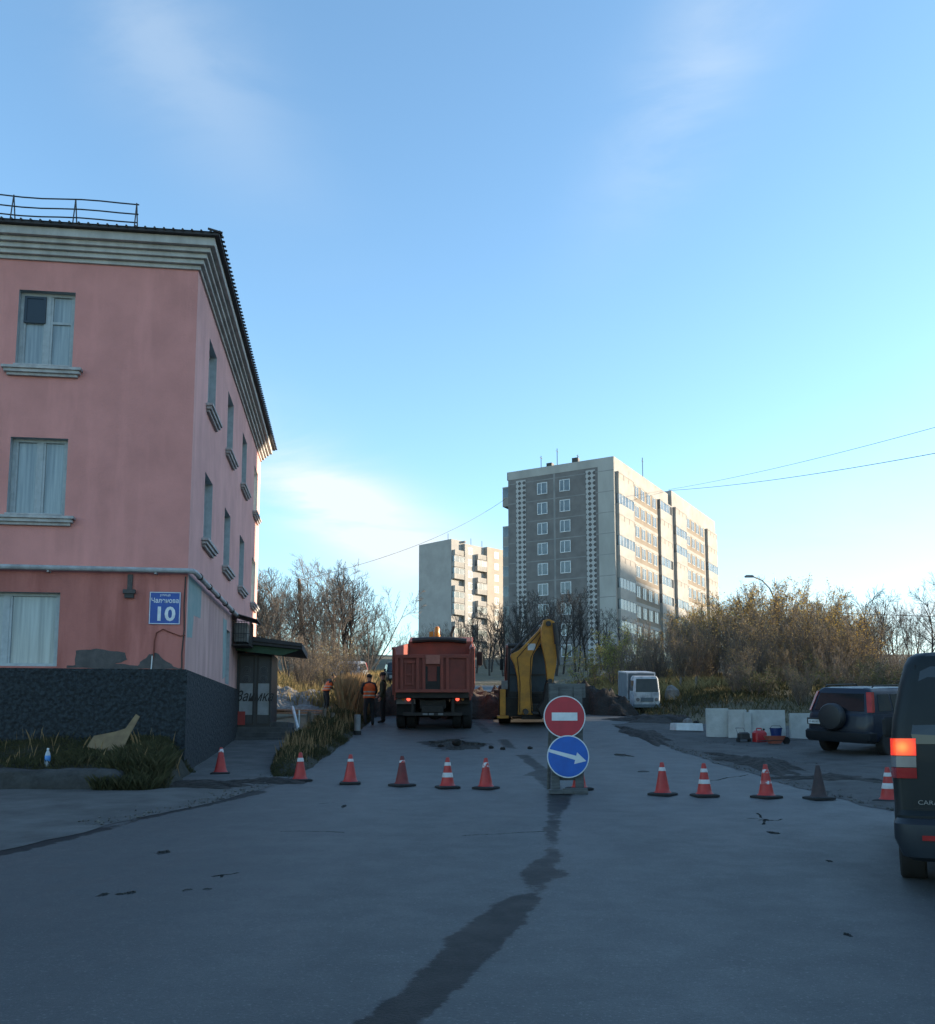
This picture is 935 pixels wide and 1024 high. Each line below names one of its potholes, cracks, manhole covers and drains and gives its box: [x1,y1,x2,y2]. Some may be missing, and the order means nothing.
pothole [428,739,486,750]
